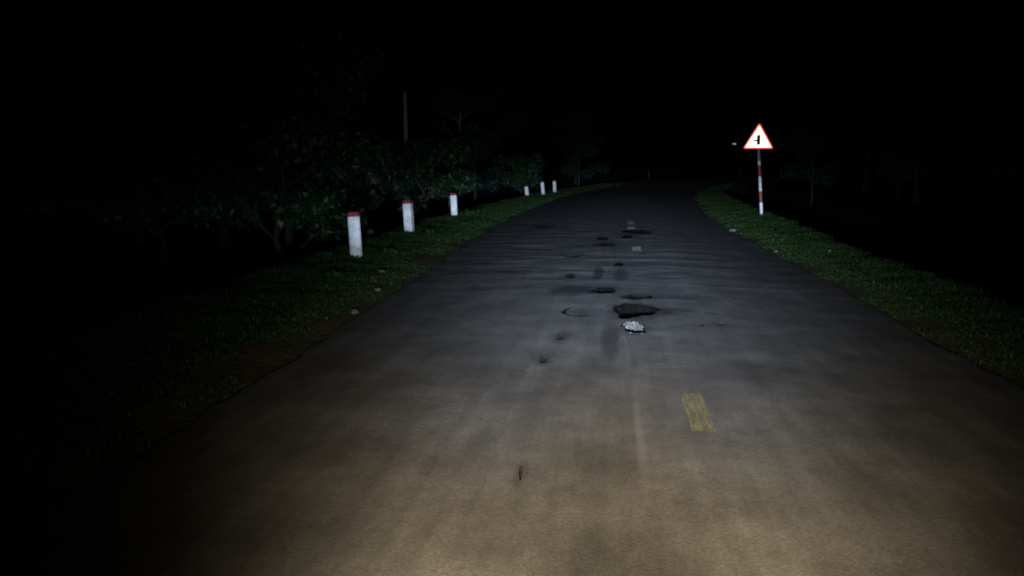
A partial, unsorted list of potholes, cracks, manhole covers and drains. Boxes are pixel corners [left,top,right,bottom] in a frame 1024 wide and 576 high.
pothole [620,319,647,342]
pothole [612,303,662,319]
